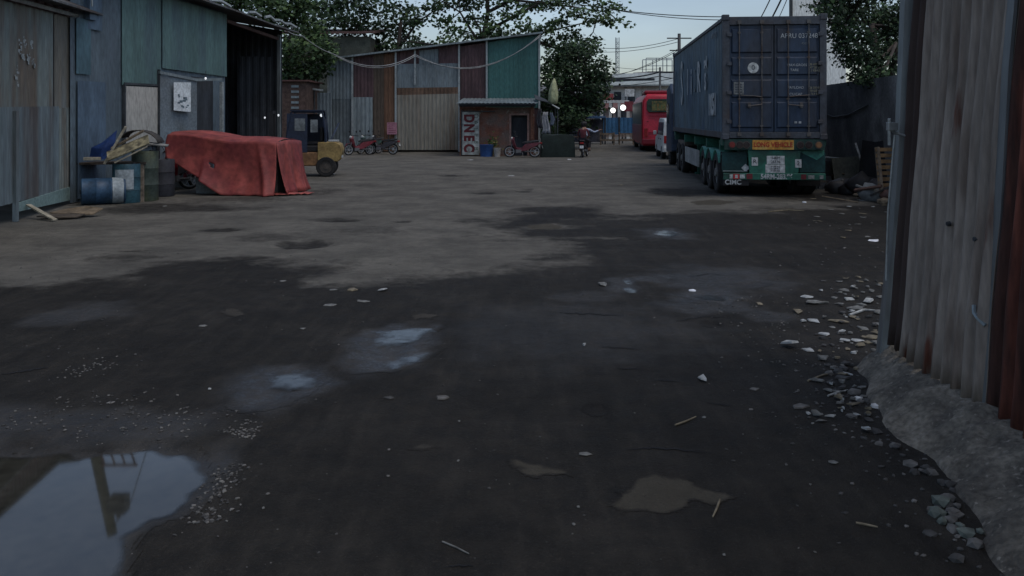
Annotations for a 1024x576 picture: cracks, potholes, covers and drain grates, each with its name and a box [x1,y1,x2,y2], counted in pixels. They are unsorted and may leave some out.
pothole [267,238,340,250]
pothole [0,438,222,576]
pothole [580,403,612,417]
pothole [224,365,334,413]
pothole [346,322,446,375]
